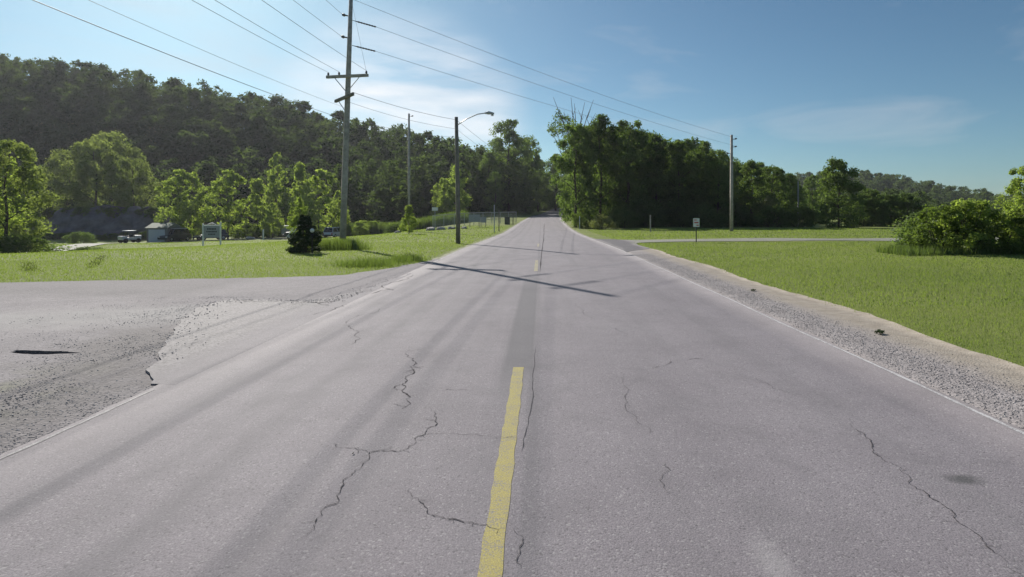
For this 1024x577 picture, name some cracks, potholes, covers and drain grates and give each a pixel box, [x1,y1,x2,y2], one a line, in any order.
crack [850,424,1020,574]
crack [231,277,409,344]
crack [392,349,421,408]
crack [298,408,507,539]
